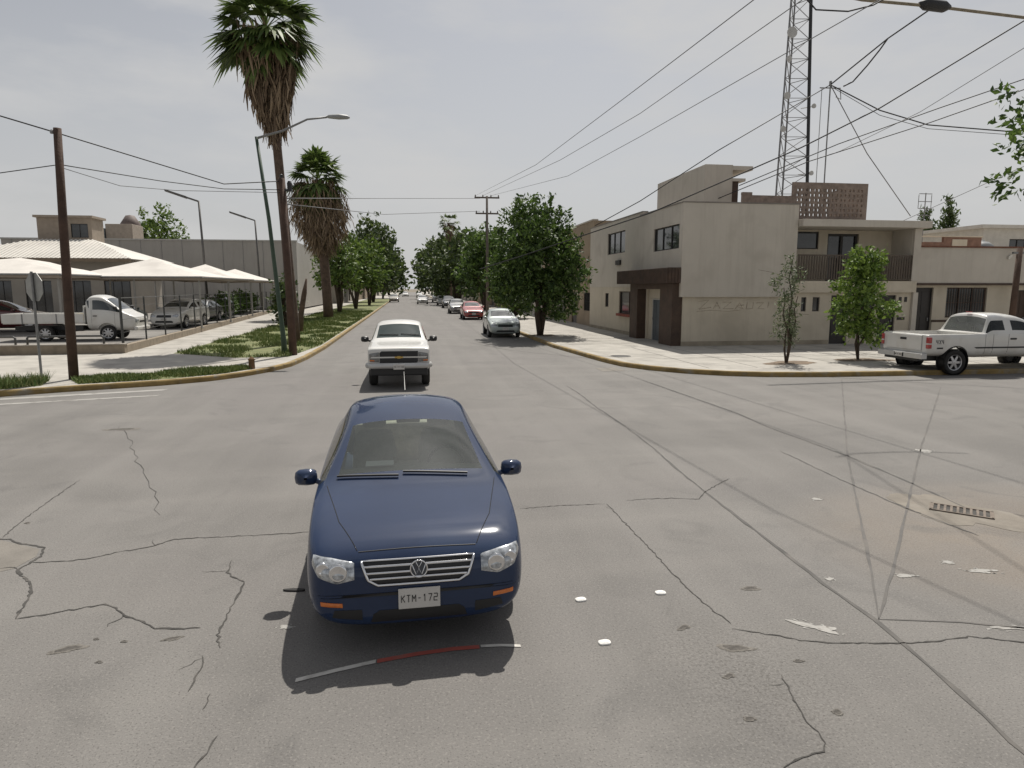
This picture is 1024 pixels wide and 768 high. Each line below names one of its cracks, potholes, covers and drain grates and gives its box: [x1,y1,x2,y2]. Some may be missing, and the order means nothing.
pothole [716,644,758,652]
crack [0,482,300,709]
crack [124,430,159,513]
pothole [46,644,90,655]
crack [777,674,826,768]
crack [607,380,1024,644]
